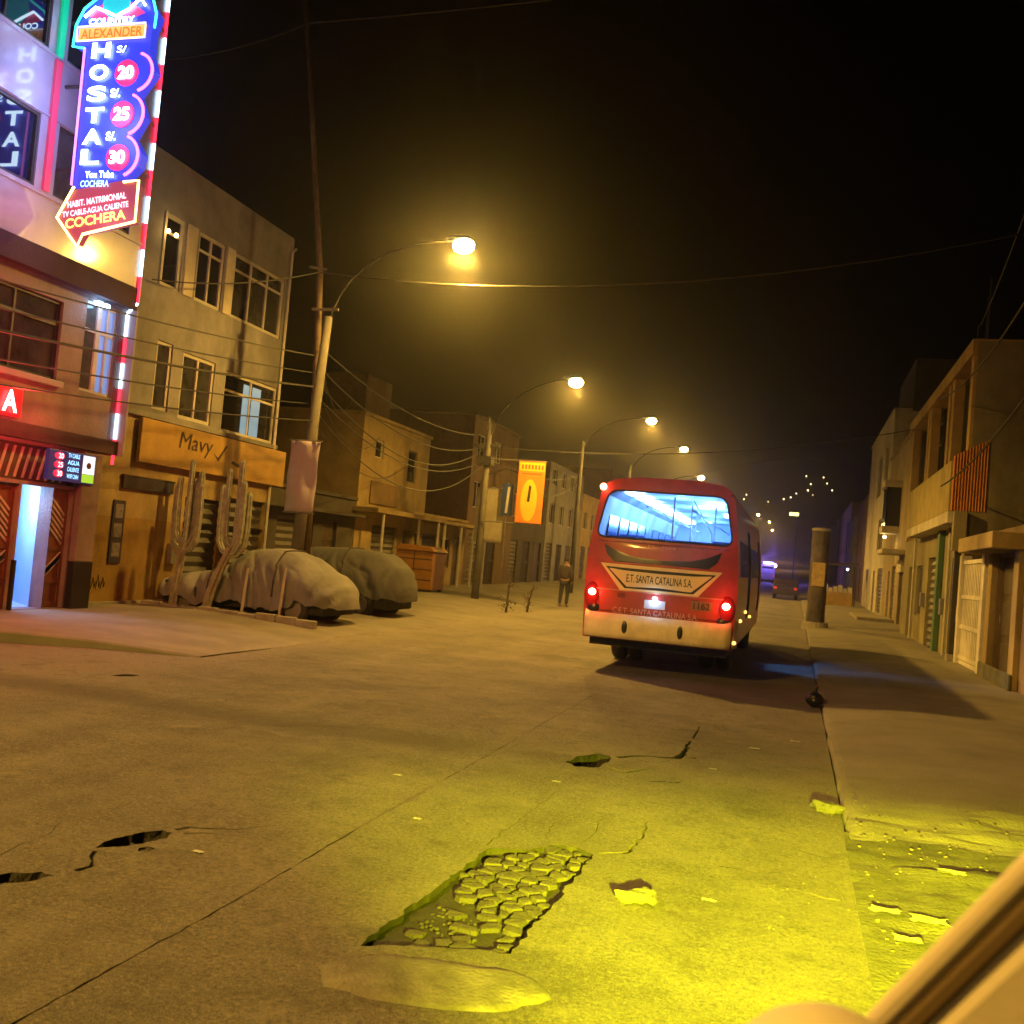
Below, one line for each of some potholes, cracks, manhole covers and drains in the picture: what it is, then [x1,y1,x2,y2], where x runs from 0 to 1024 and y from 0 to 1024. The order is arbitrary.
crack [0,801,277,871]
crack [607,726,701,783]
crack [361,790,648,954]
